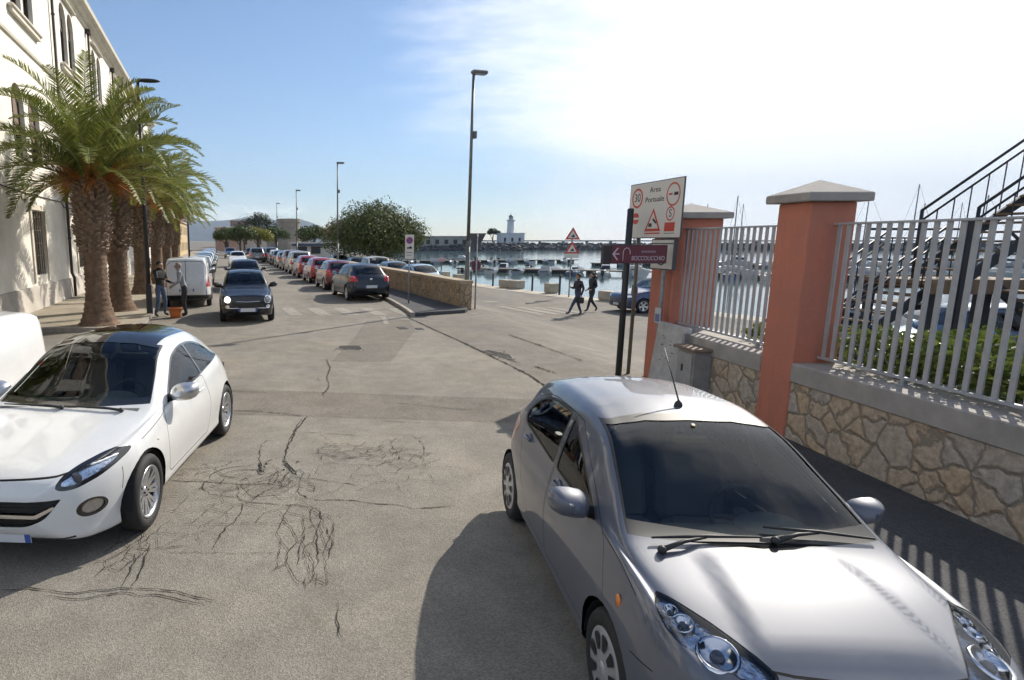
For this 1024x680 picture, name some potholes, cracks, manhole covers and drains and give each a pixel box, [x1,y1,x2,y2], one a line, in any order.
crack [0,417,455,608]
